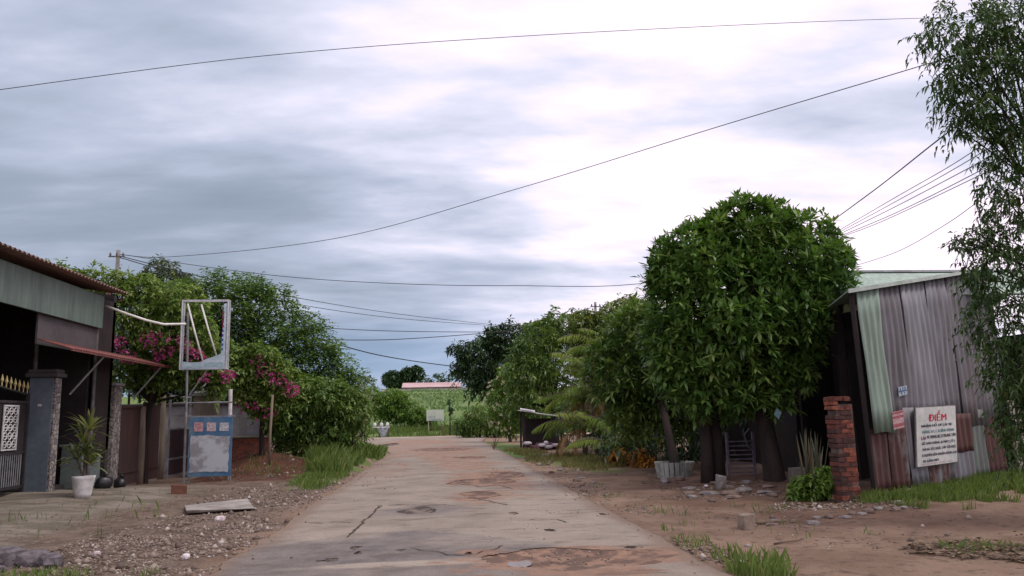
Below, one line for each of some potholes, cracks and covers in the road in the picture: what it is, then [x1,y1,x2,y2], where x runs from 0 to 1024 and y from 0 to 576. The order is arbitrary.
pothole [460,491,501,499]
crack [327,505,382,538]
pothole [481,547,679,571]
